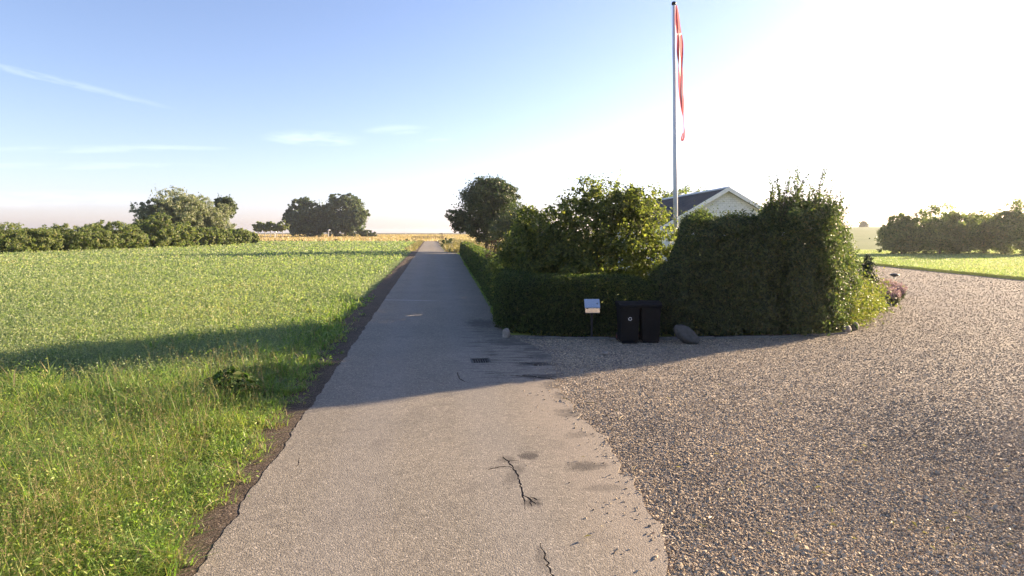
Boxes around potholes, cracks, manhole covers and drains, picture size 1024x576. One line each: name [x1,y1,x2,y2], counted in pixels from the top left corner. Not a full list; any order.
crack [540,543,554,576]
crack [488,457,537,508]
